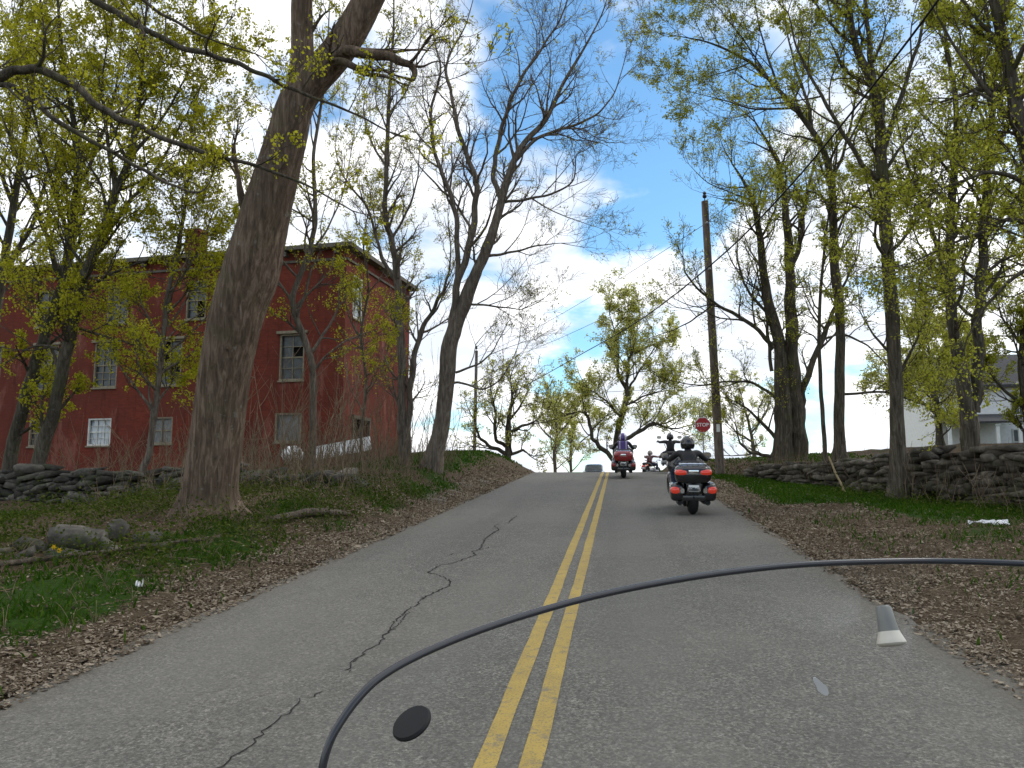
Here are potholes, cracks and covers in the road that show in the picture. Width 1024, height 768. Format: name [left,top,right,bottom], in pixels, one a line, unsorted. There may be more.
crack [217,517,515,768]
